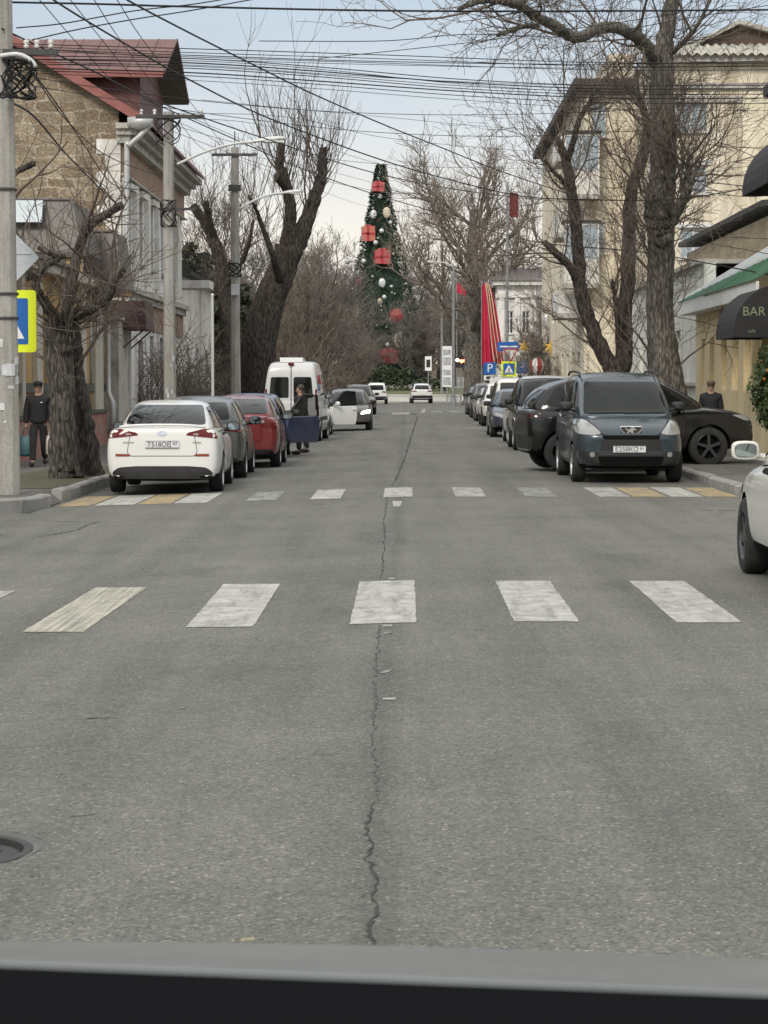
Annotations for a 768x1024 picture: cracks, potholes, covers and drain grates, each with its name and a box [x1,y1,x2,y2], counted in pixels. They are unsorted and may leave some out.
crack [359,416,418,944]
manhole cover [0,830,45,864]
